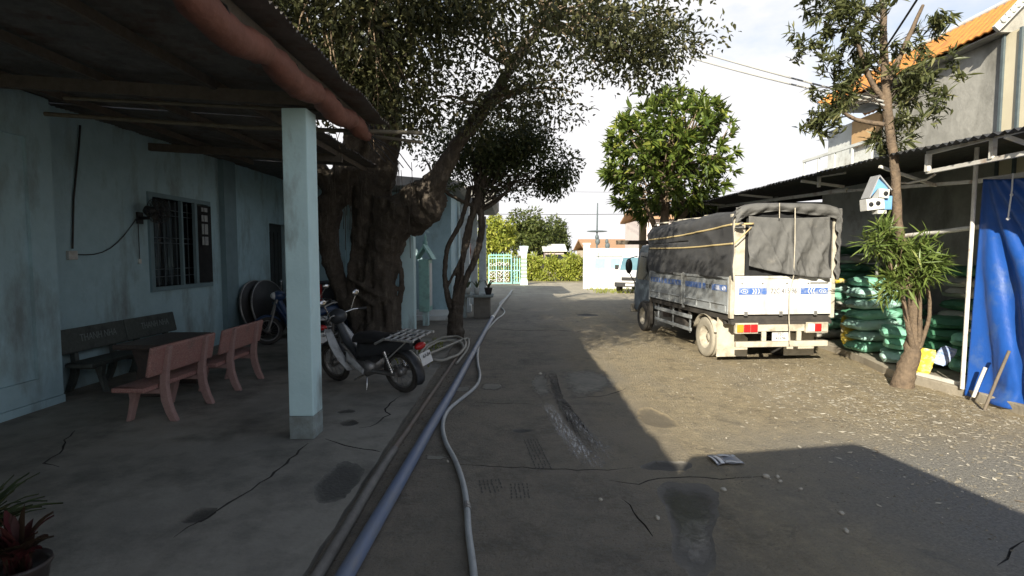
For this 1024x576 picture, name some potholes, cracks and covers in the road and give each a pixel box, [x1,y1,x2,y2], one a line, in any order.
crack [997,541,1024,566]
crack [327,396,400,452]
crack [611,476,762,536]
crack [42,432,73,467]
